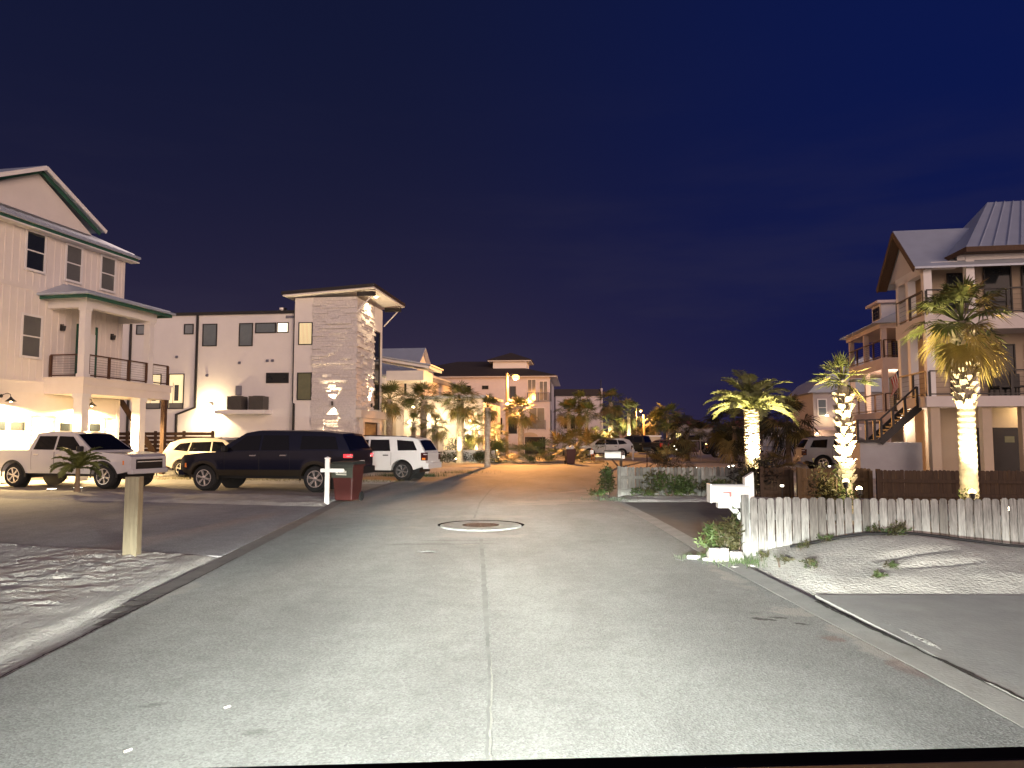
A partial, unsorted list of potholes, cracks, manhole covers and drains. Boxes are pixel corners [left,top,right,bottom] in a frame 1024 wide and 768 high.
manhole cover [438,520,524,531]
